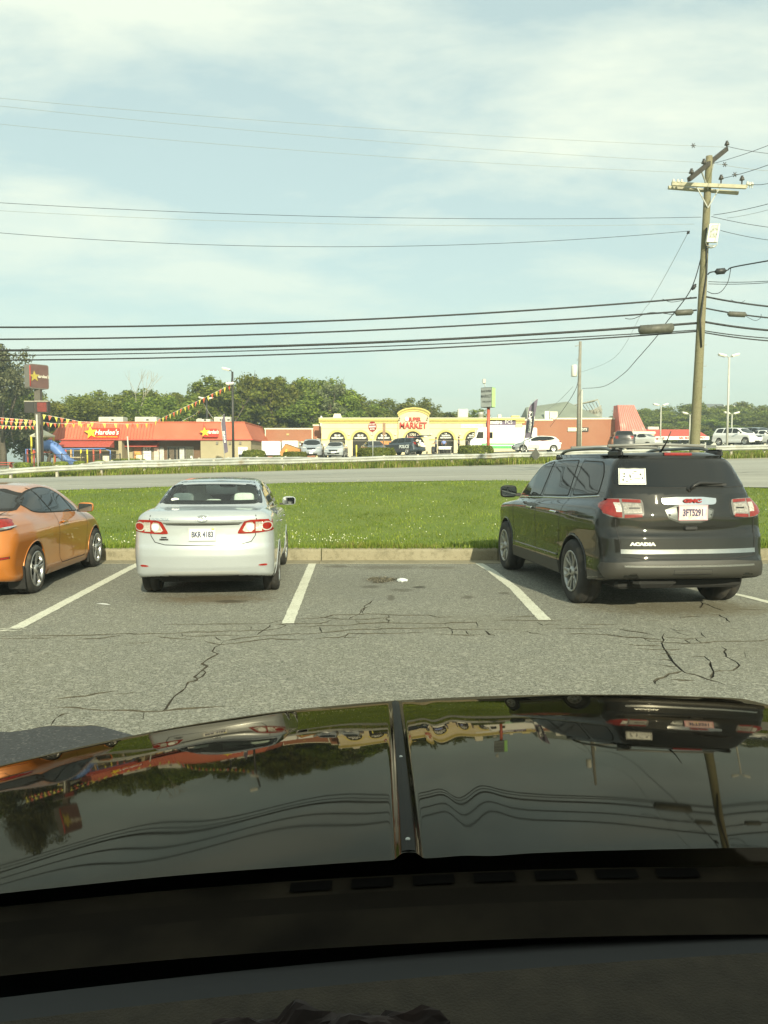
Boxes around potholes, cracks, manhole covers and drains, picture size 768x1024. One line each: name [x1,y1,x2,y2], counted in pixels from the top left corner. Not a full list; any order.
crack [0,601,768,732]
